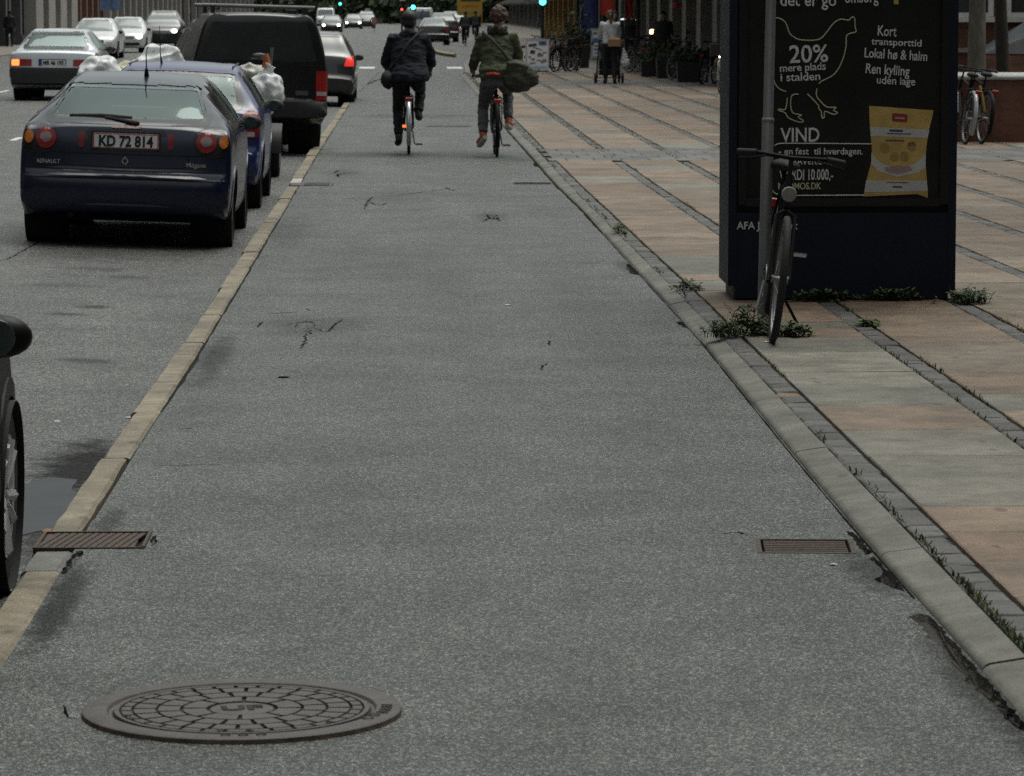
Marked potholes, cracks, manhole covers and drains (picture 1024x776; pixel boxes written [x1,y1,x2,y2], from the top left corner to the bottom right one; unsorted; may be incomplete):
manhole cover [81,678,402,745]
drain grate [755,538,857,554]
crack [346,187,455,210]
pothole [909,613,1024,731]
pothole [869,556,907,593]
